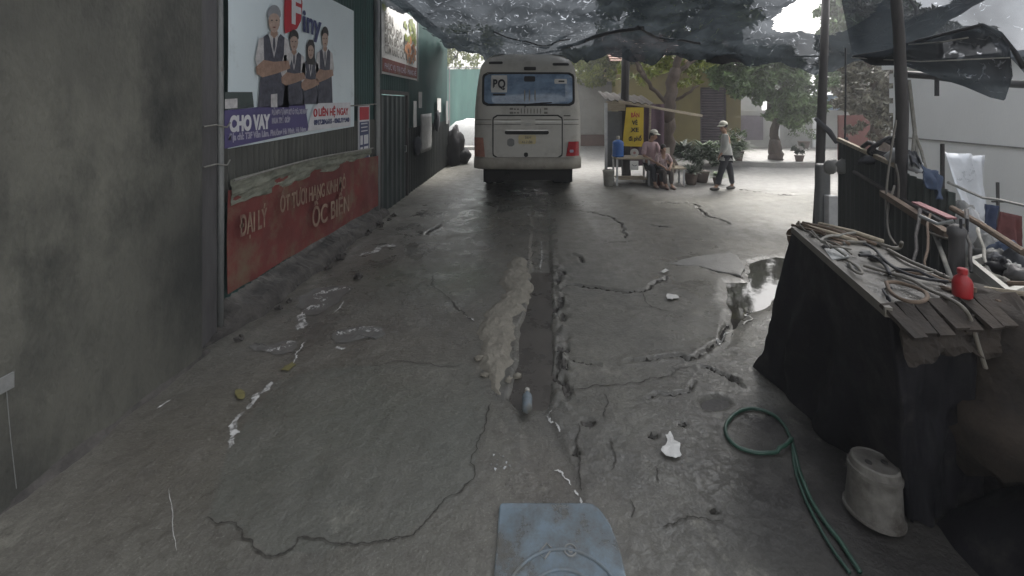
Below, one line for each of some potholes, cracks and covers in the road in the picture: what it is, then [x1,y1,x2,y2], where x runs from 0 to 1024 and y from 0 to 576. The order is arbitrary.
crack [577,336,729,415]
crack [581,279,668,311]
crack [579,212,632,263]
pothole [720,257,784,343]
crack [208,403,491,557]
